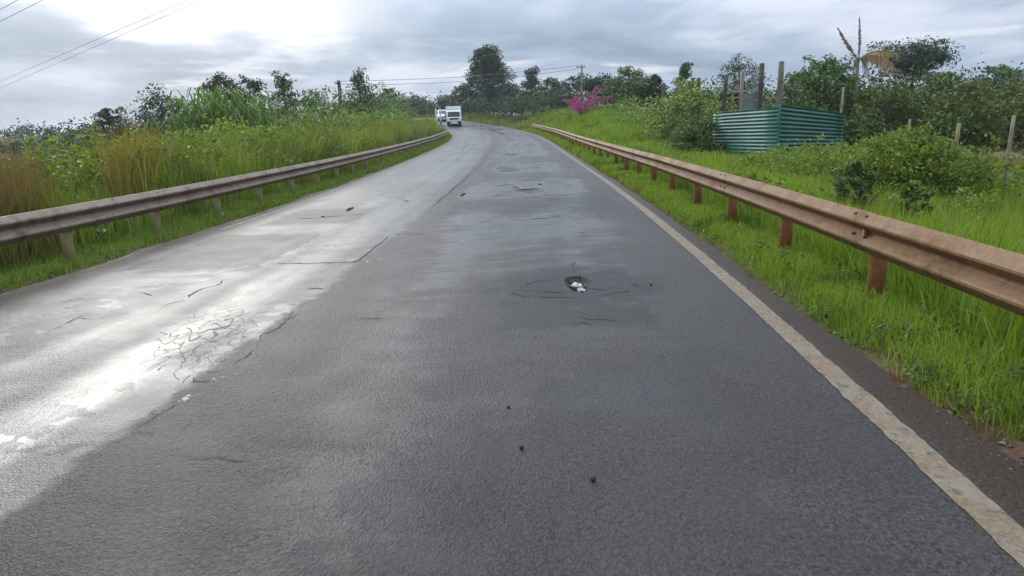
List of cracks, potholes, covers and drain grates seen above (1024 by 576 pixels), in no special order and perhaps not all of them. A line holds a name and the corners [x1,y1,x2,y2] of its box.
pothole [512,186,544,194]
crack [510,255,638,298]
pothole [564,276,591,293]
crack [138,288,323,386]
